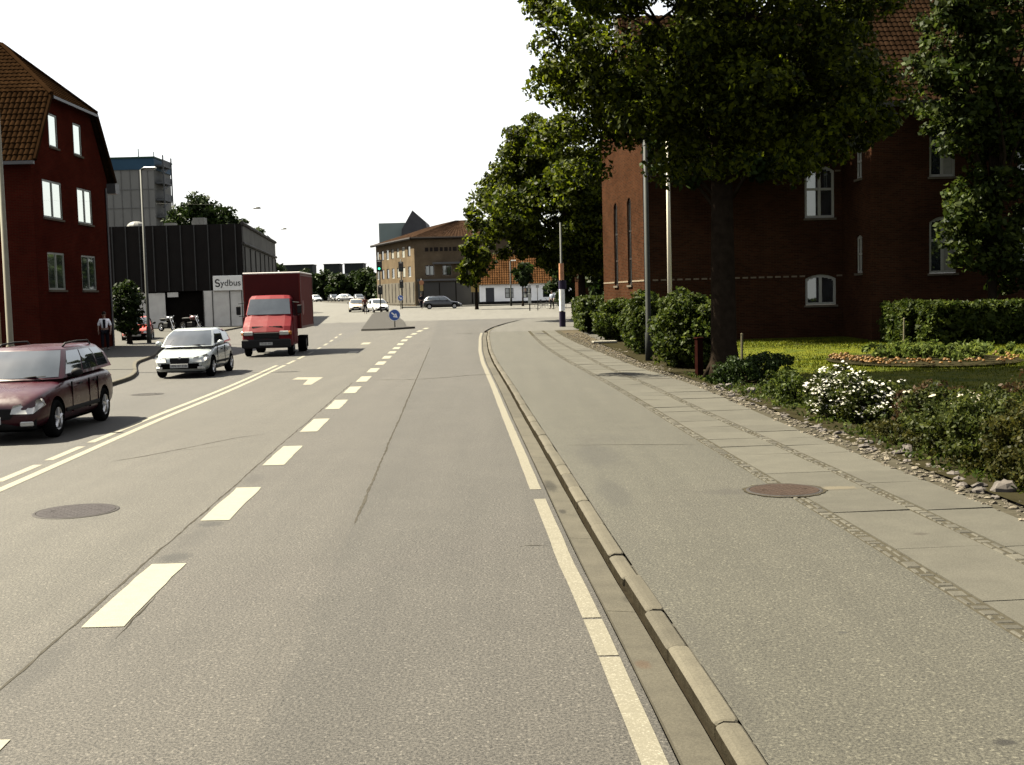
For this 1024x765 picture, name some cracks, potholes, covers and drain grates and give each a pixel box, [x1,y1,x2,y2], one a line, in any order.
crack [355,348,485,522]
manhole cover [742,483,827,497]
manhole cover [31,503,120,519]
